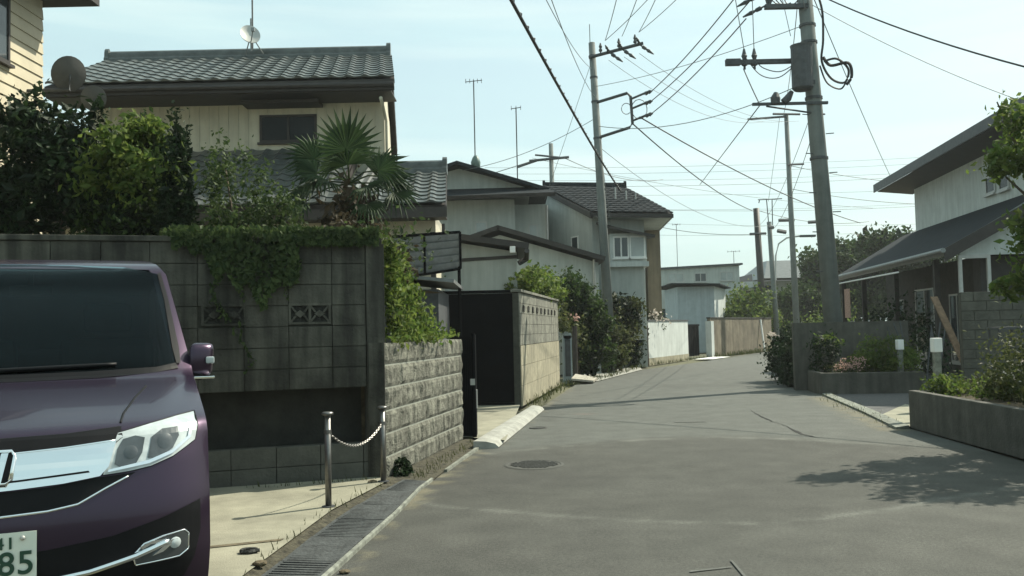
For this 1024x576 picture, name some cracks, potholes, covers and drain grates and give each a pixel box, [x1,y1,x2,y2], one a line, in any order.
crack [751,410,820,438]
manhole cover [504,460,564,470]
